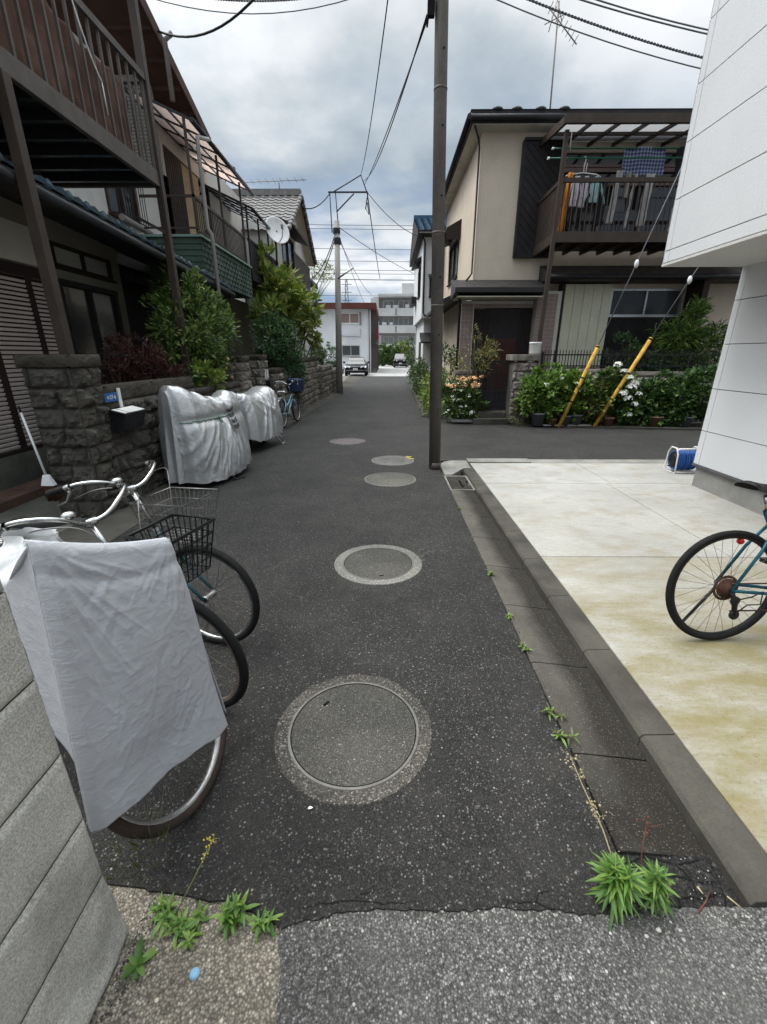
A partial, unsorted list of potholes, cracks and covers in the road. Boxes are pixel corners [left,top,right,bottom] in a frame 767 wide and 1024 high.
crack [631,856,727,909]
crack [503,890,558,910]
manhole cover [371,455,414,466]
manhole cover [364,472,416,487]
crack [295,891,417,909]
manhole cover [334,545,434,585]
manhole cover [274,674,432,806]
